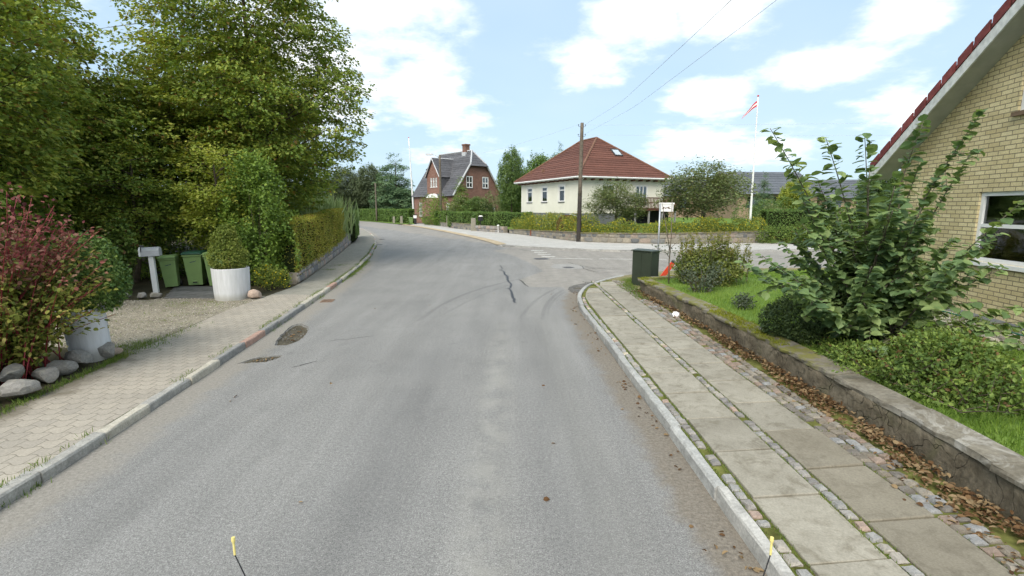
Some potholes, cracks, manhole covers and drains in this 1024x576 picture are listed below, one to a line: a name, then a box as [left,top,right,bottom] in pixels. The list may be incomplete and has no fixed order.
pothole [275,324,309,346]
pothole [238,355,282,364]
